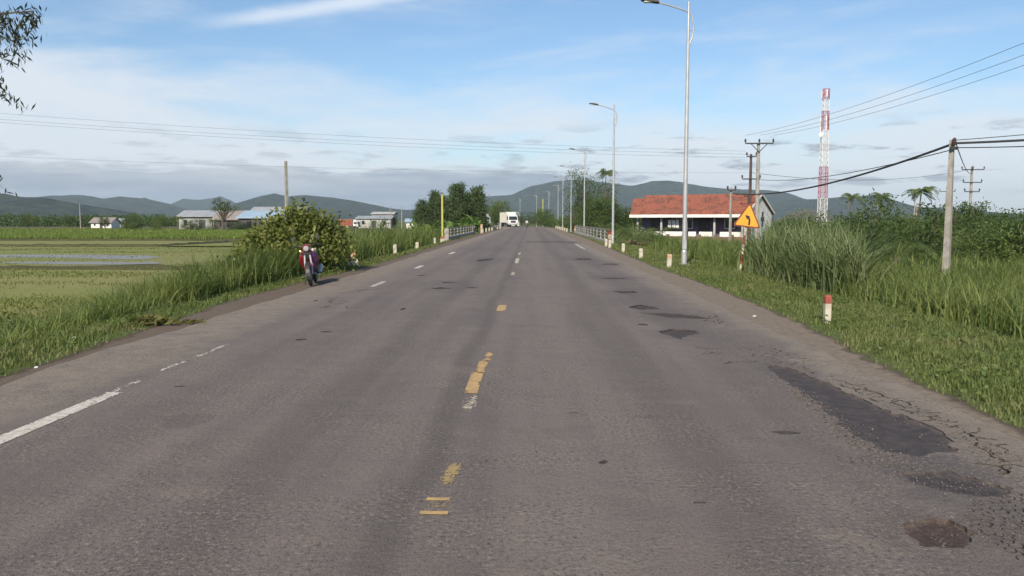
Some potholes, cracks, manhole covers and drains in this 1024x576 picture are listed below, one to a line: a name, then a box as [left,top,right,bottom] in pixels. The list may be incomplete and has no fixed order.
pothole [902,518,978,548]
crack [785,387,913,470]
crack [827,376,1024,475]
crack [963,493,1024,560]
